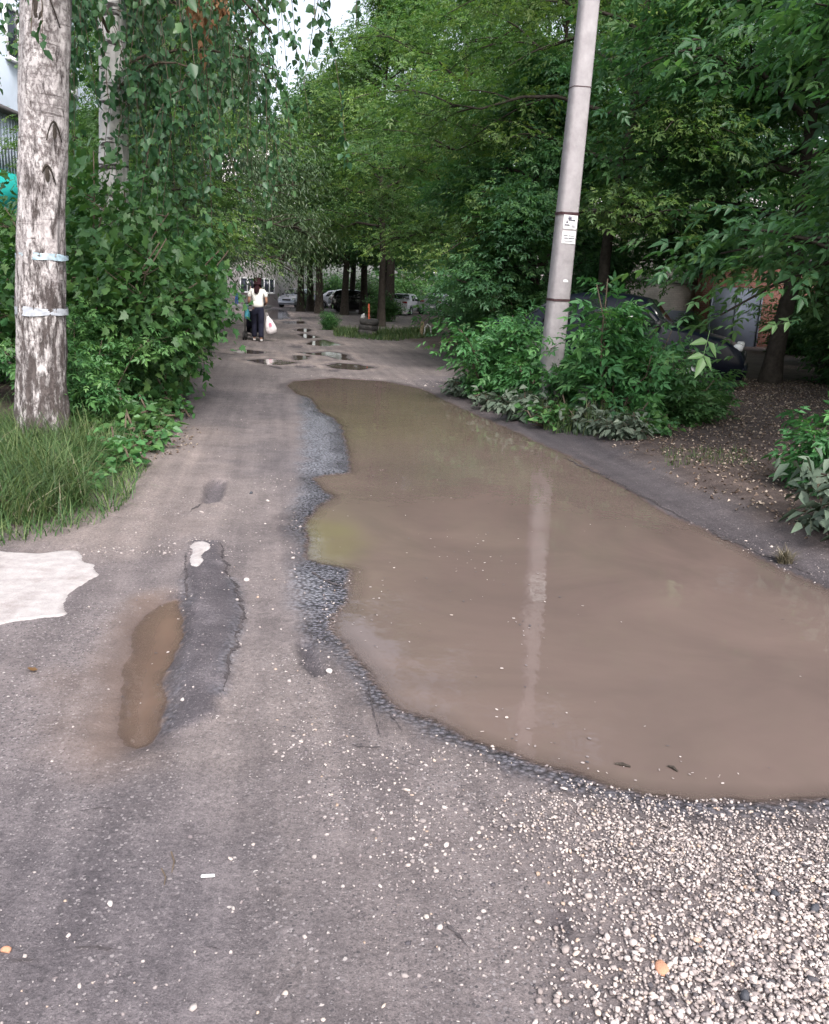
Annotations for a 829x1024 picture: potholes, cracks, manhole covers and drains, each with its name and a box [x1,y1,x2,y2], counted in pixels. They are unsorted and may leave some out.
pothole [299,351,354,361]
pothole [285,378,829,810]
pothole [99,595,195,753]
